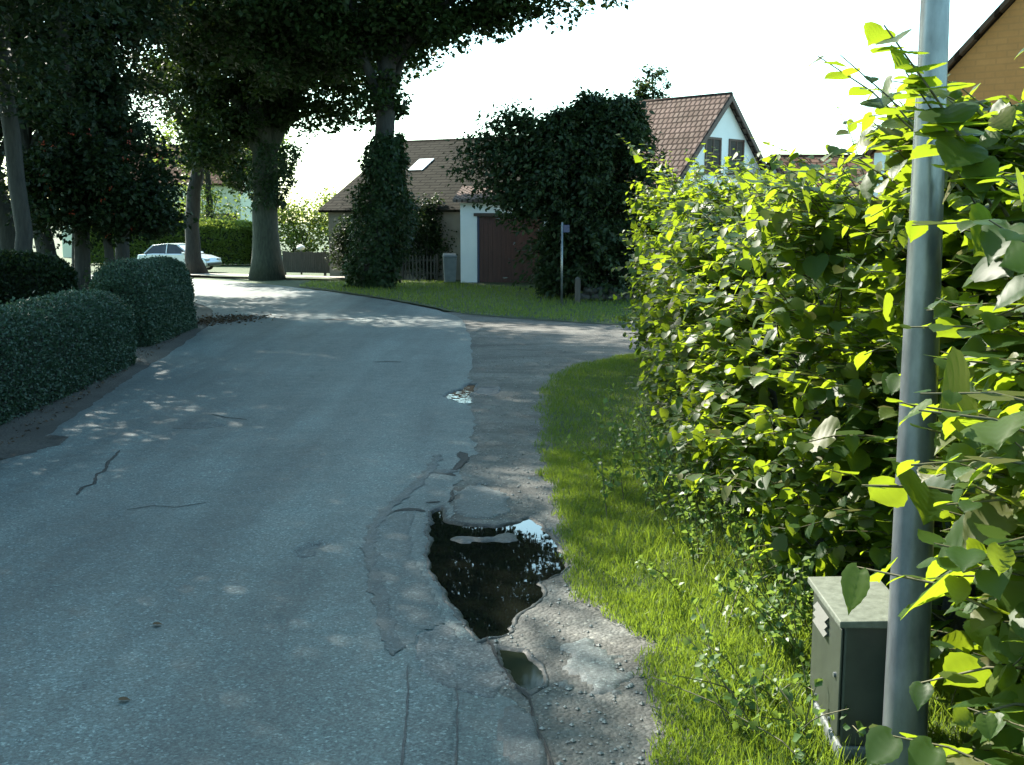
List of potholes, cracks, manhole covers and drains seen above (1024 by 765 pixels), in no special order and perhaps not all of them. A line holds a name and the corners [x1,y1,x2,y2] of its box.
pothole [496,645,549,696]
pothole [423,505,571,643]
pothole [443,383,478,403]
crack [455,623,554,765]
crack [76,450,206,509]
